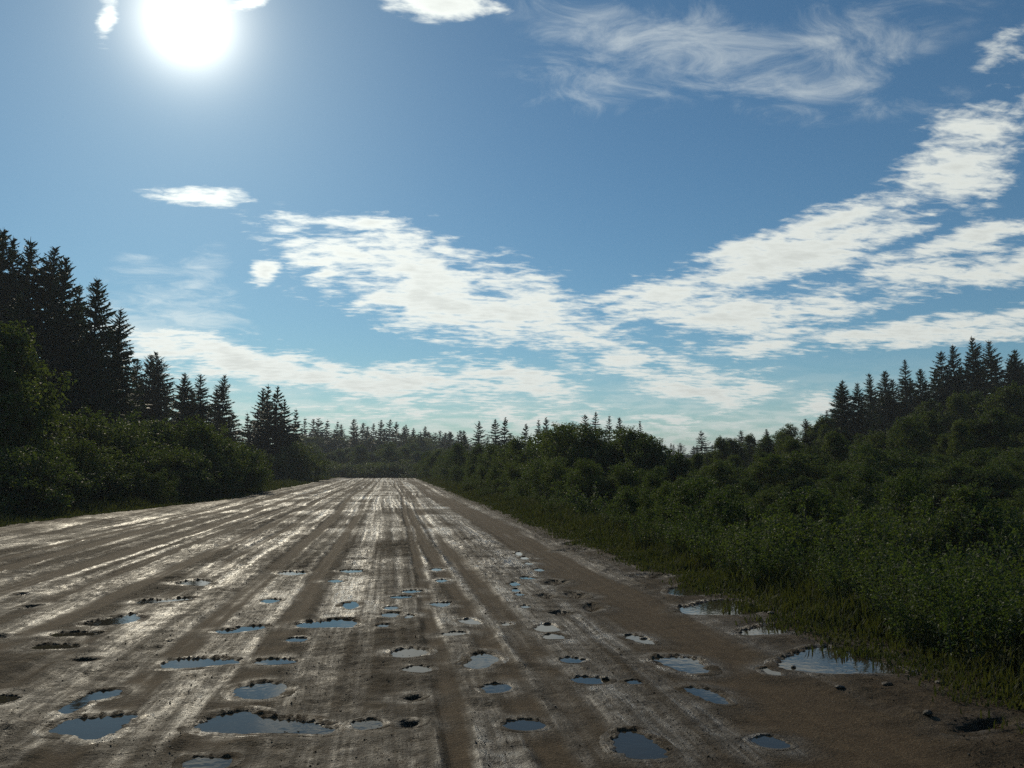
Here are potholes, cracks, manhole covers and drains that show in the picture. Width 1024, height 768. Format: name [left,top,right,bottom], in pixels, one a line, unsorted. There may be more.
pothole [599,725,684,764]
pothole [764,644,918,677]
pothole [382,645,438,658]
pothole [73,612,151,628]
pothole [454,649,509,670]
pothole [669,598,769,616]
pothole [494,716,555,733]
pothole [46,687,133,716]
pothole [639,653,723,677]
pothole [563,674,617,686]
pothole [30,710,155,746]
pothole [206,623,274,634]
